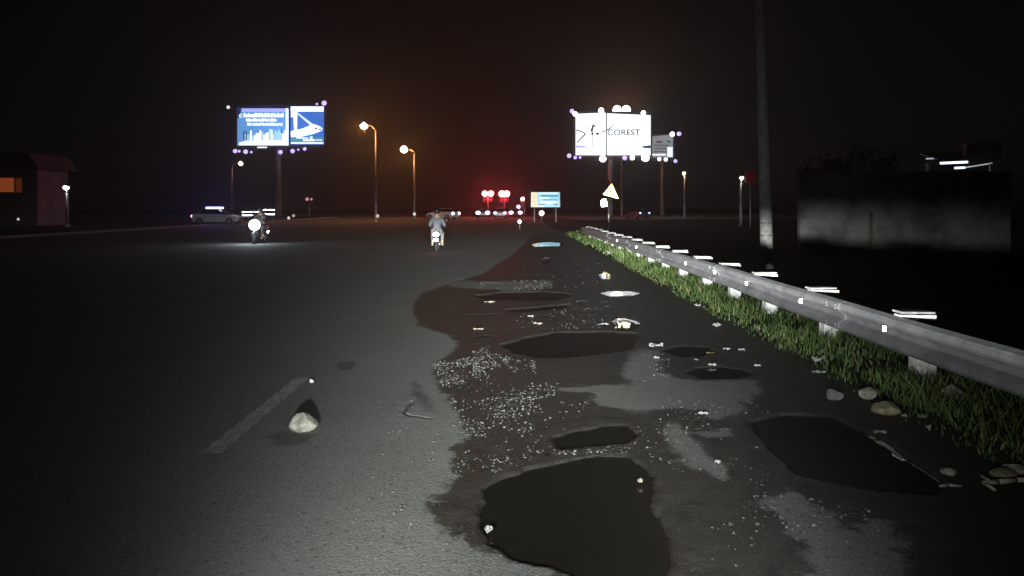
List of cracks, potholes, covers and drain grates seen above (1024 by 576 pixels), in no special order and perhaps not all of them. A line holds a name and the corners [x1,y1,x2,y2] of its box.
pothole [452,444,708,576]
pothole [466,290,583,302]
pothole [492,302,584,314]
pothole [525,416,660,458]
pothole [649,343,731,361]
pothole [490,329,653,360]
pothole [667,362,768,383]
pothole [727,407,984,507]
